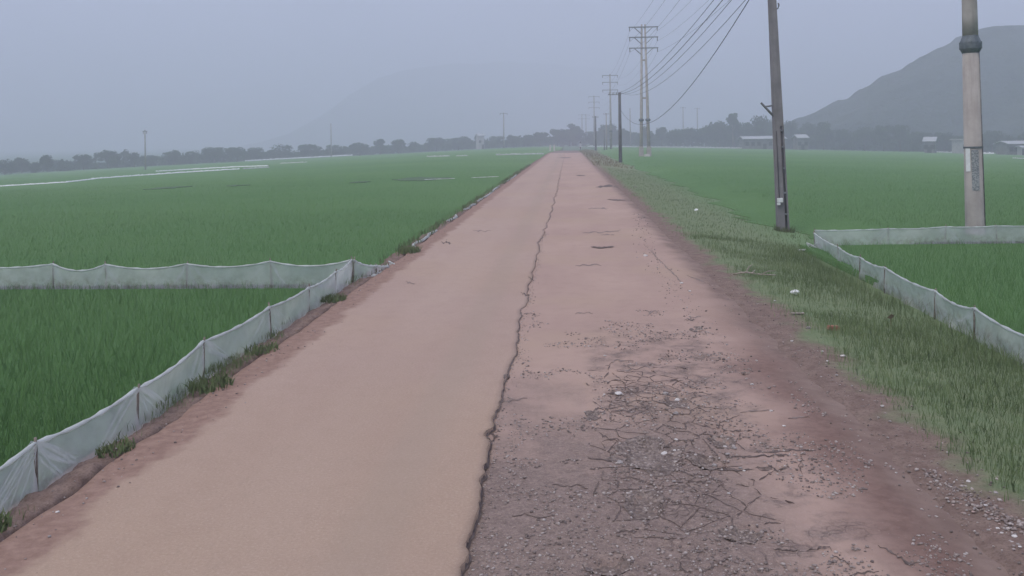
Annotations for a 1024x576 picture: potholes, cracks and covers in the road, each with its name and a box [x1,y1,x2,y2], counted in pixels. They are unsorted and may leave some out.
crack [679,557,729,573]
crack [774,545,917,576]
crack [585,356,814,561]
